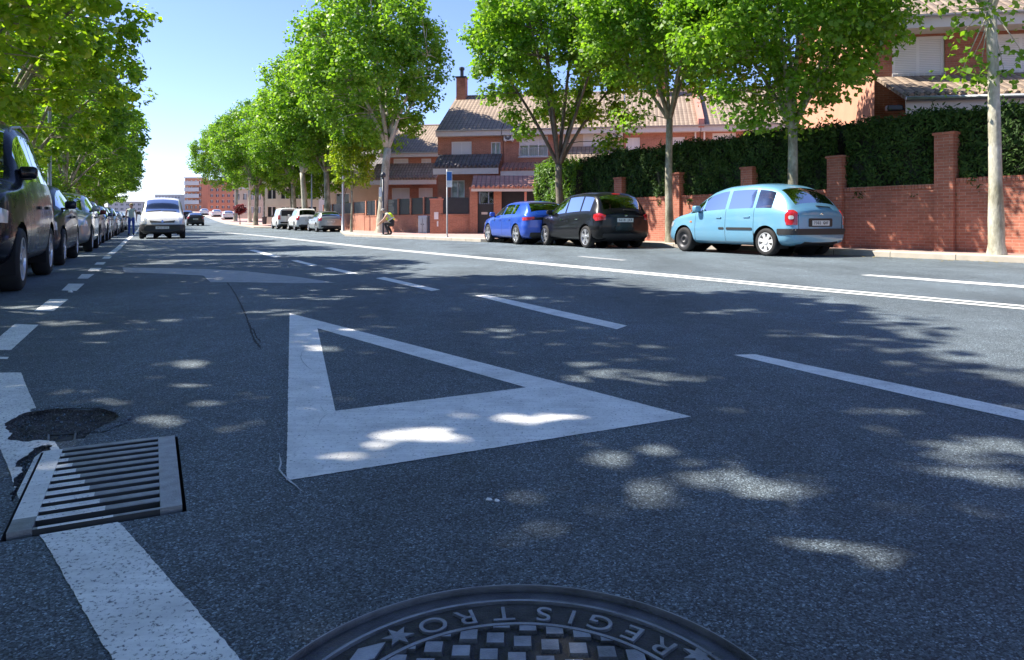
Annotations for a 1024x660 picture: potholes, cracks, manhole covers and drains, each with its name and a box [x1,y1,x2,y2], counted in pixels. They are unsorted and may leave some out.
pothole [5,404,133,442]
crack [228,283,261,349]
manhole cover [286,584,757,660]
drain grate [0,435,187,542]
